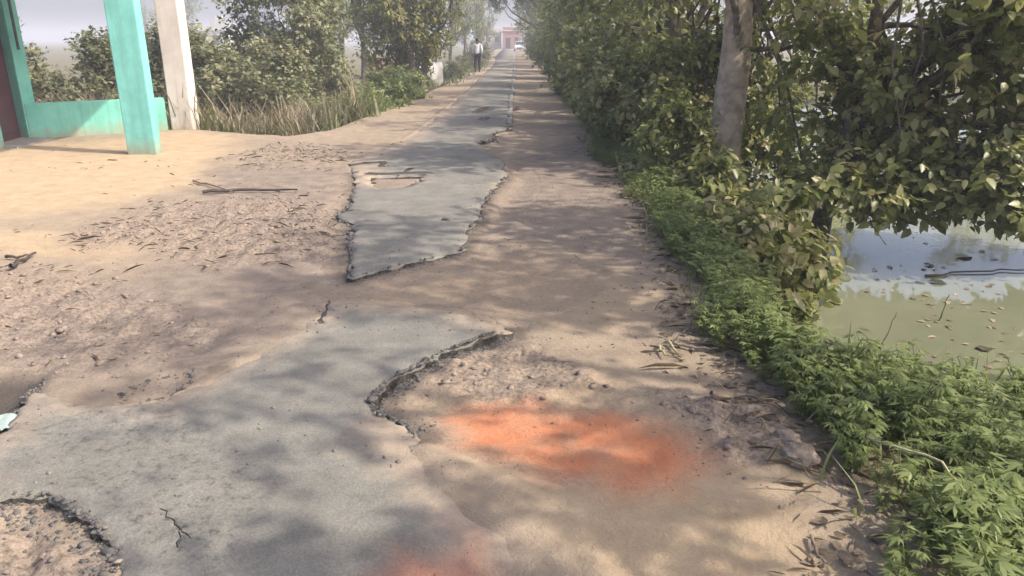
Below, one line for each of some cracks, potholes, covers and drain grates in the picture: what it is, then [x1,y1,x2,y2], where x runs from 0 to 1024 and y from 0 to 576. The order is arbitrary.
pothole [371,175,421,189]
crack [317,303,330,324]
pothole [0,490,119,576]
pothole [367,328,702,491]
